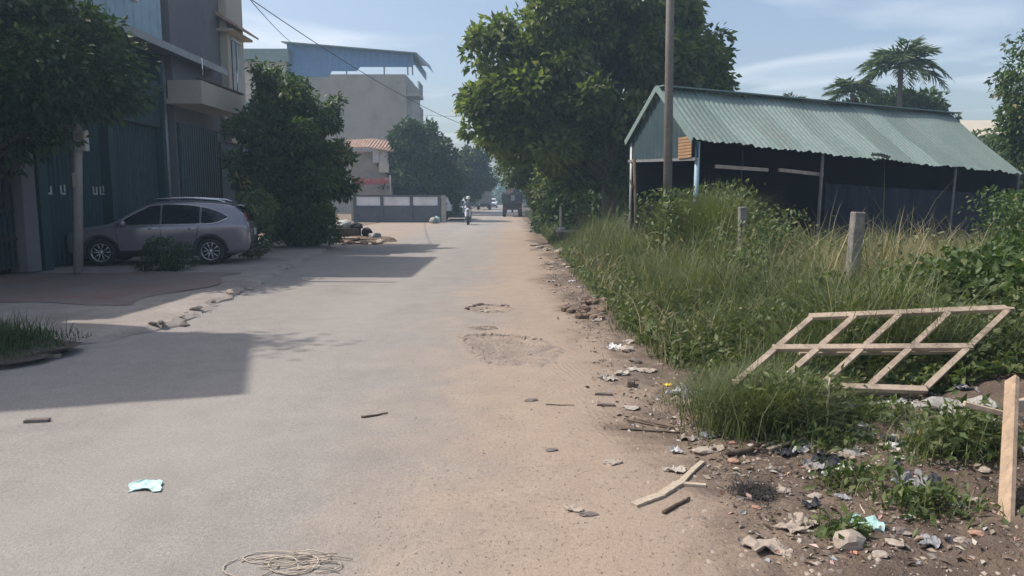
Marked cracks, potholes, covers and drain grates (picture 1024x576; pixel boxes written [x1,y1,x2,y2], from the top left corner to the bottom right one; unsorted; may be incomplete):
pothole [462,303,516,314]
pothole [457,332,567,367]
